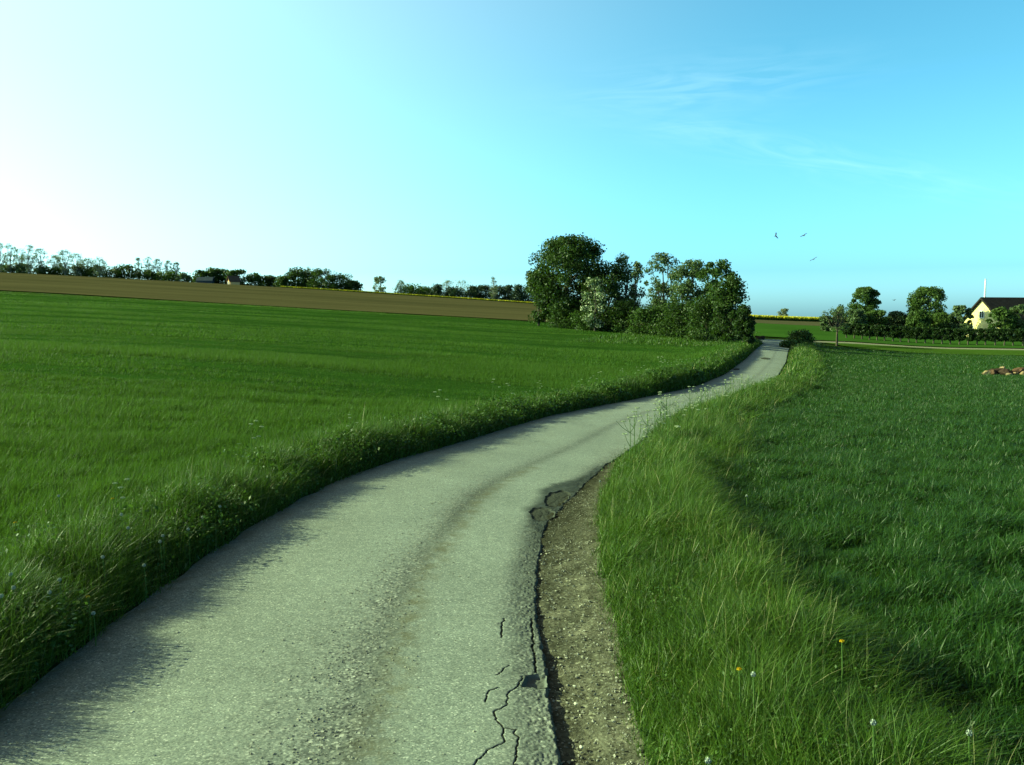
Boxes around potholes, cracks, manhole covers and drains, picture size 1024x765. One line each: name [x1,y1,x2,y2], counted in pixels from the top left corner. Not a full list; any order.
pothole [521,674,547,689]
pothole [544,490,571,507]
crack [474,619,537,765]
pothole [529,507,555,521]
